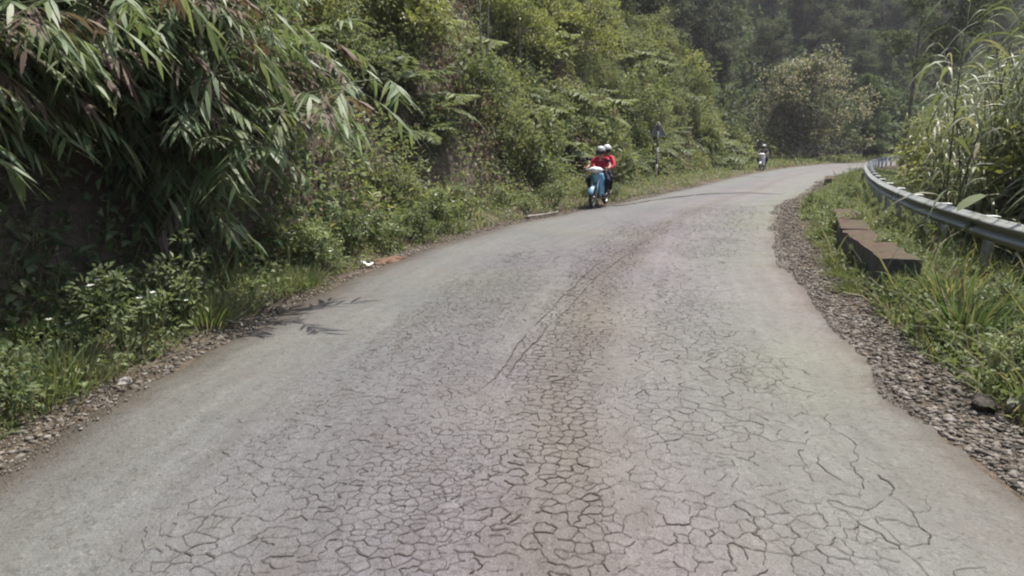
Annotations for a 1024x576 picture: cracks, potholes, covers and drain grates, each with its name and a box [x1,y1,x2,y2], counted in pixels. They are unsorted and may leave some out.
crack [416,221,684,576]
crack [576,257,1008,576]
crack [91,245,585,576]
